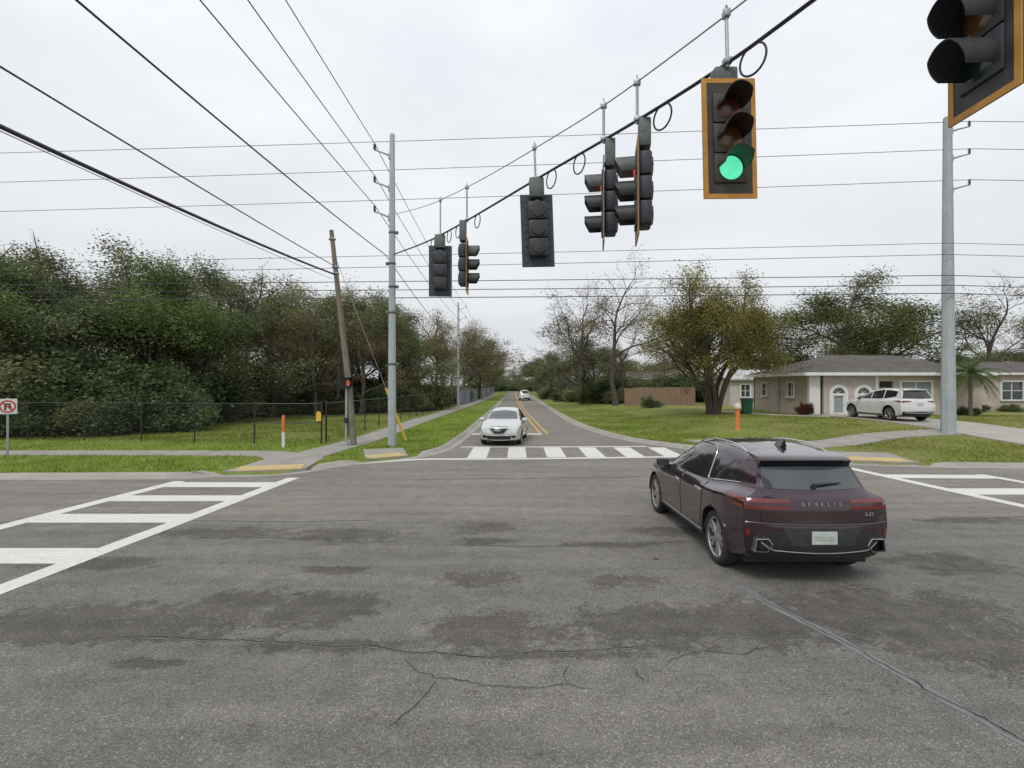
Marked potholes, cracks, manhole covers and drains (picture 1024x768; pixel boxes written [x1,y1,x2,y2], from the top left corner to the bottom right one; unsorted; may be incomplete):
crack [95,635,806,728]
